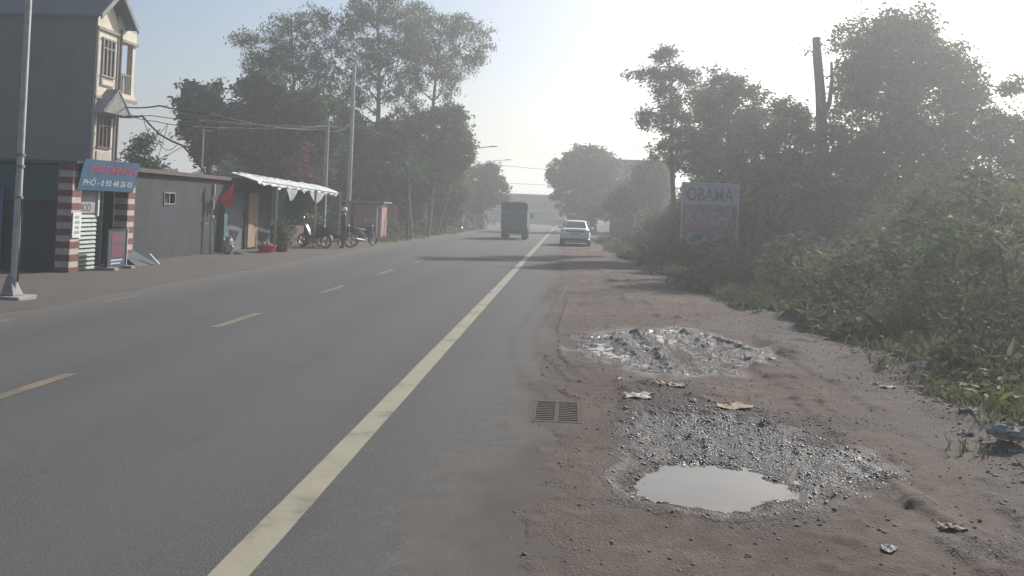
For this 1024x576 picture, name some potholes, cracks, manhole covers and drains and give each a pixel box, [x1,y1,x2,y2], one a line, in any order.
drain grate [531,400,581,424]
pothole [595,401,914,524]
pothole [557,327,765,376]
